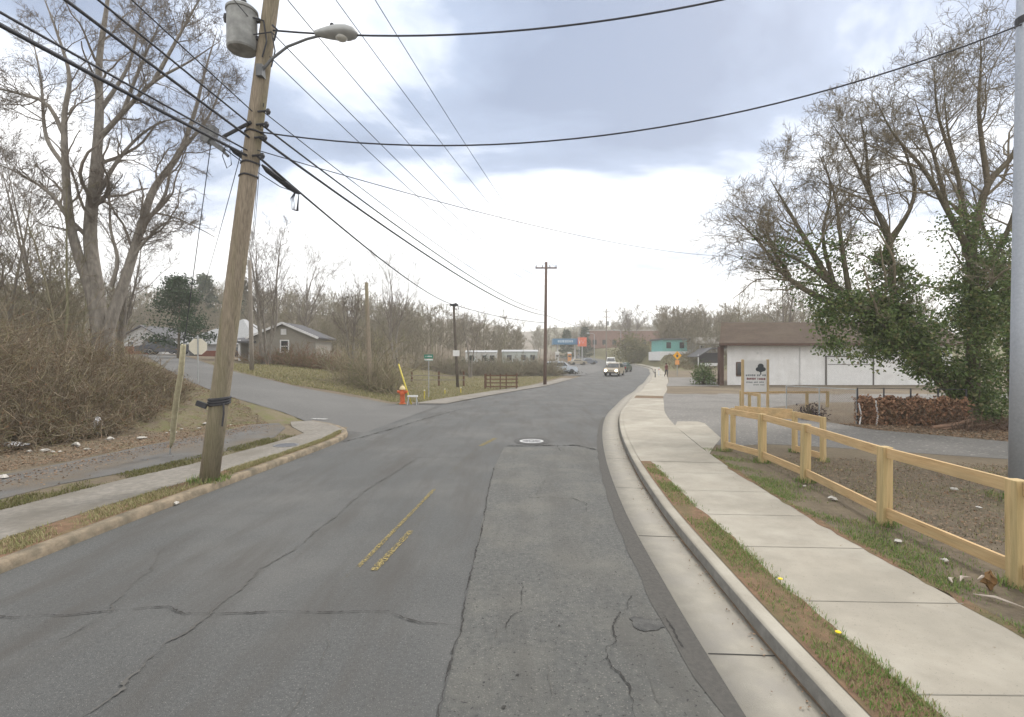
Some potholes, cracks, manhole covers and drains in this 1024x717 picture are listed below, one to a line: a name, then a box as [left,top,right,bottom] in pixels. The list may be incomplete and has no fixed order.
manhole cover [514,437,550,445]
crack [606,596,683,717]
crack [0,546,456,712]
